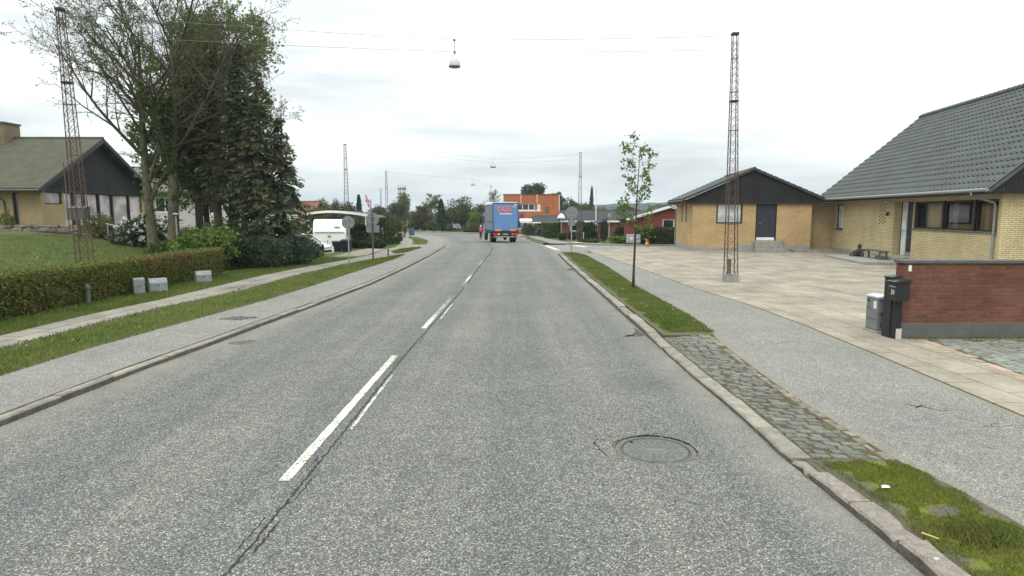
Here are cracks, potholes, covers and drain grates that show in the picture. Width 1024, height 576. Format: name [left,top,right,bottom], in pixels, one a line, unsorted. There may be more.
crack [593,433,690,457]
manhole cover [614,436,698,465]
crack [907,404,1012,427]
